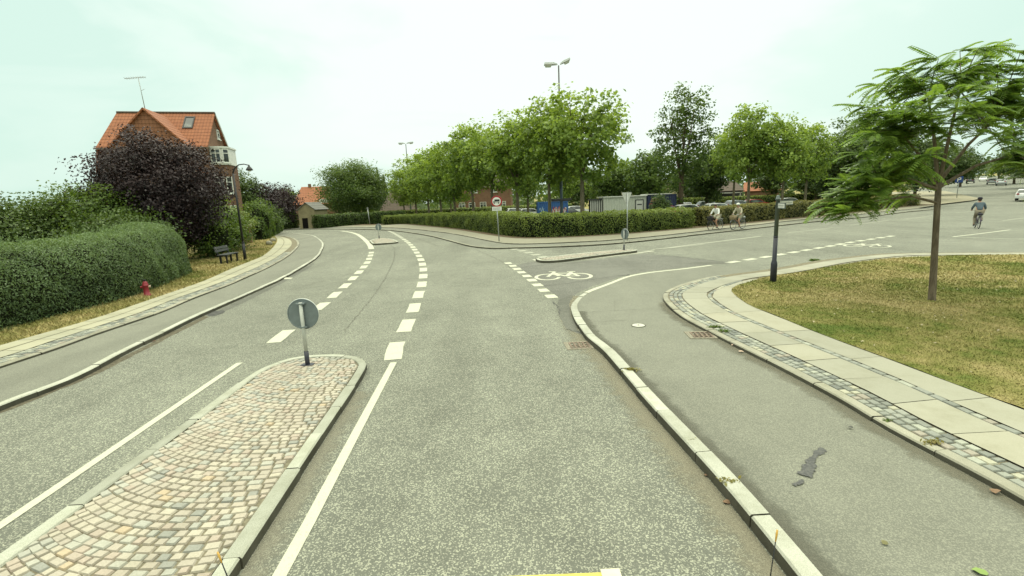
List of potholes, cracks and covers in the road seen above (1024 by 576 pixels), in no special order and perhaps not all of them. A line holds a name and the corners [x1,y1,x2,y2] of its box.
drain grate [563,341,594,350]
drain grate [684,331,718,339]
